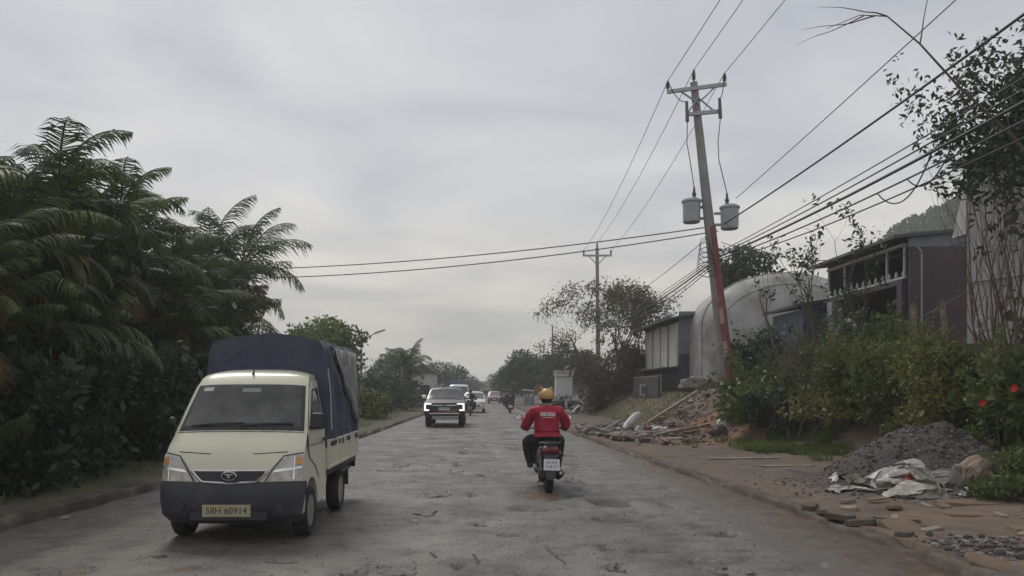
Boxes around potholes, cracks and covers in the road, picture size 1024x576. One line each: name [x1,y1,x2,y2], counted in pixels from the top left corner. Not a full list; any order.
pothole [595,500,632,508]
crack [497,535,567,565]
